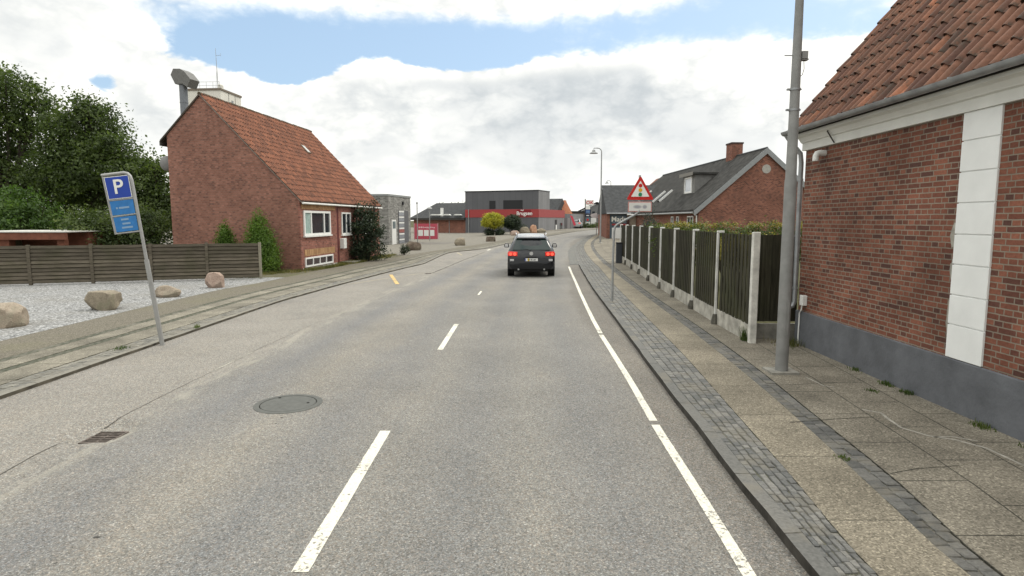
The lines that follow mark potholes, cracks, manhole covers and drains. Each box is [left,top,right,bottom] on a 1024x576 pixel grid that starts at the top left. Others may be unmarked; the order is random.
manhole cover [253,394,323,414]
drain grate [78,431,129,444]
